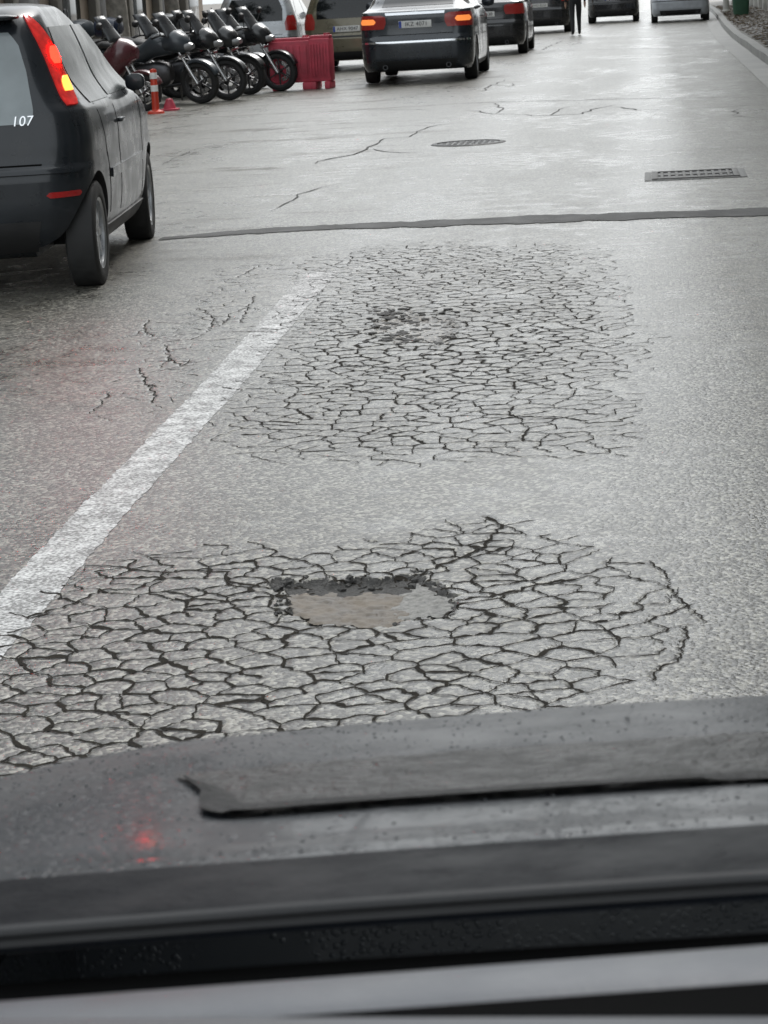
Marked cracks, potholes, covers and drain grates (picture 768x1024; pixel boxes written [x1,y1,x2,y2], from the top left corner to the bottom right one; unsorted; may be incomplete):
pothole [265,569,460,629]
crack [0,516,707,776]
drain grate [645,168,748,181]
crack [457,79,733,116]
crack [209,241,671,467]
crack [316,109,436,163]
